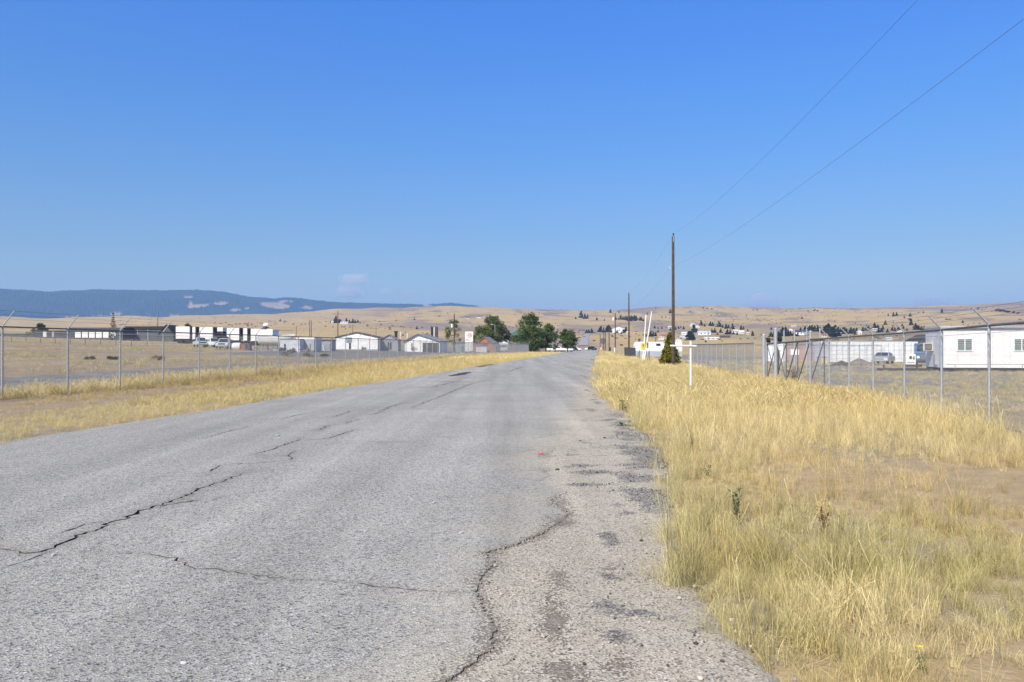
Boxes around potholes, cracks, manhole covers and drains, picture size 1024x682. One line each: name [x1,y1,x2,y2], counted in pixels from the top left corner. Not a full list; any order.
crack [3,463,276,565]
crack [117,552,461,593]
